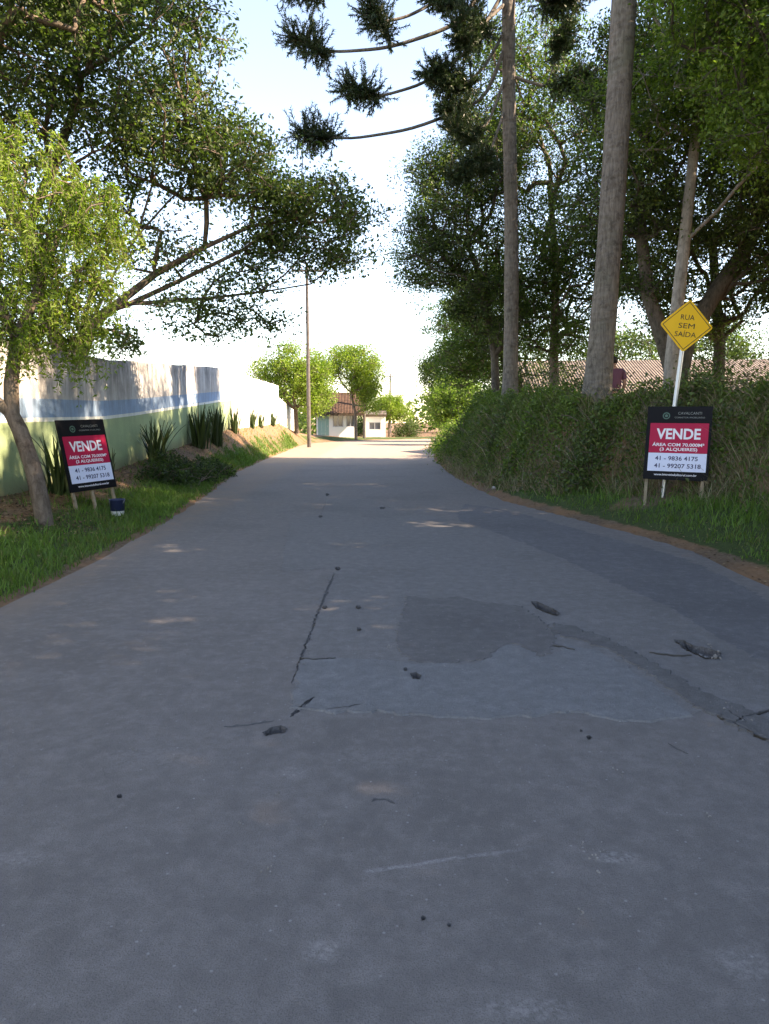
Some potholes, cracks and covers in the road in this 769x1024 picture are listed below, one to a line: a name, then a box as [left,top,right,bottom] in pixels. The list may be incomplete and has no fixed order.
pothole [531,601,560,615]
crack [290,698,313,717]
crack [717,709,769,741]
pothole [262,725,287,736]
pothole [674,639,721,659]
